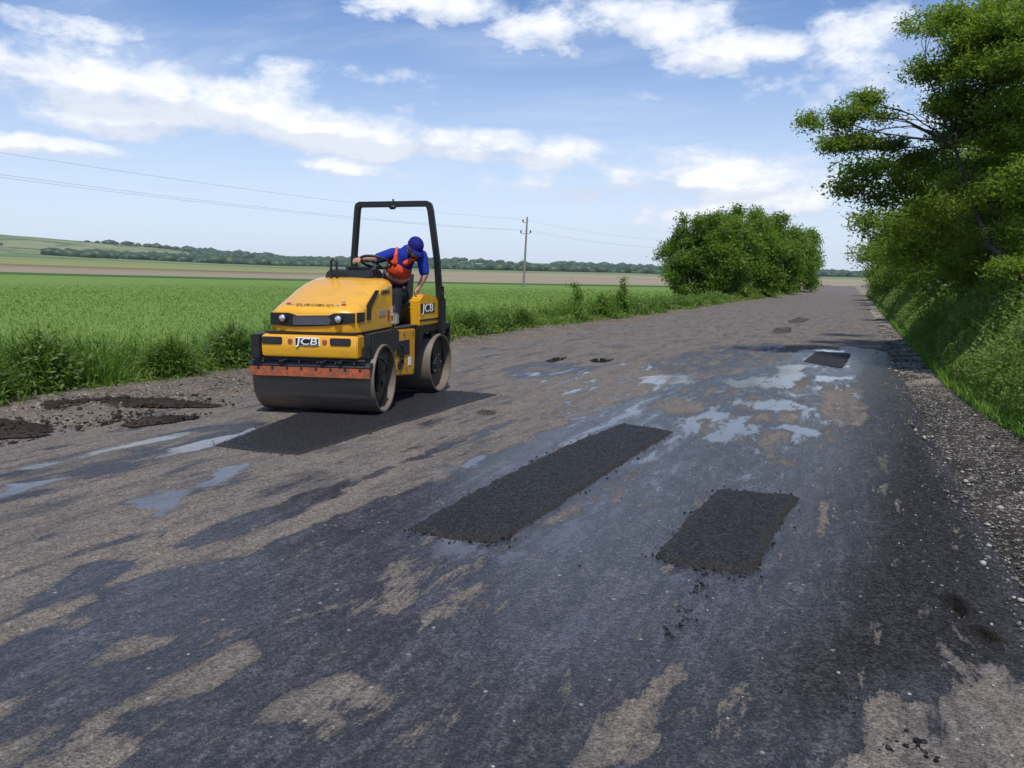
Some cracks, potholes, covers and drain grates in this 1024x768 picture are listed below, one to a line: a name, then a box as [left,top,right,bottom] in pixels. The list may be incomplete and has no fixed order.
pothole [967,624,1008,647]
pothole [937,593,976,623]
